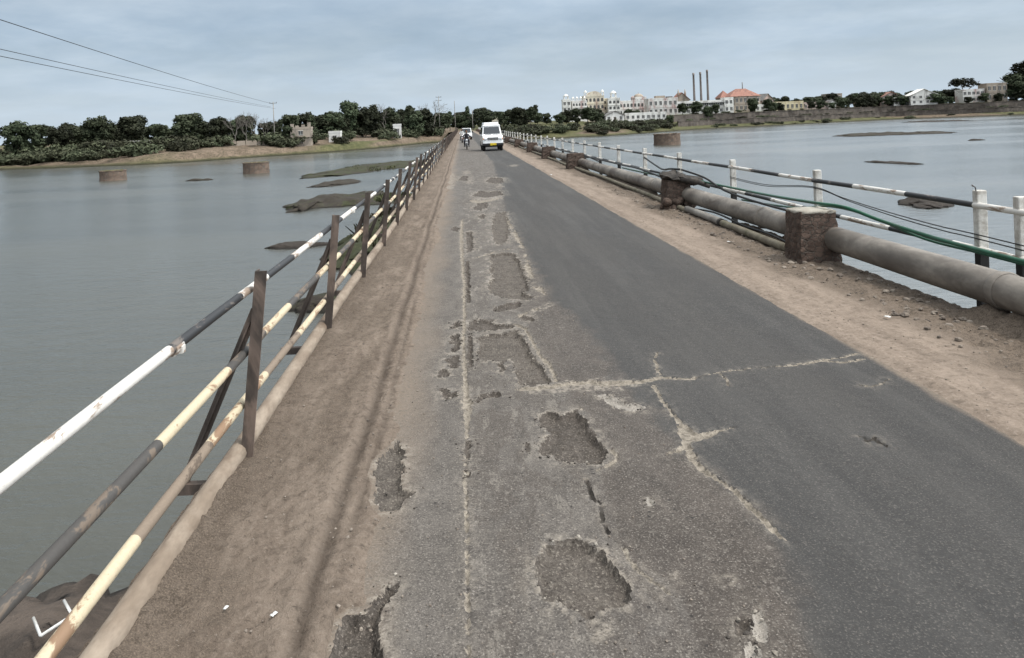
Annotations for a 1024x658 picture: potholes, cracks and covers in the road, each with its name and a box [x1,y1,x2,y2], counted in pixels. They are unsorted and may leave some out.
pothole [476,330,552,387]
pothole [538,409,609,465]
pothole [370,440,413,512]
pothole [534,538,632,620]
pothole [444,355,461,369]
pothole [449,334,463,352]
pothole [439,388,459,400]
pothole [488,252,533,300]
pothole [329,583,400,658]
pothole [491,212,510,244]
crack [459,197,876,658]
